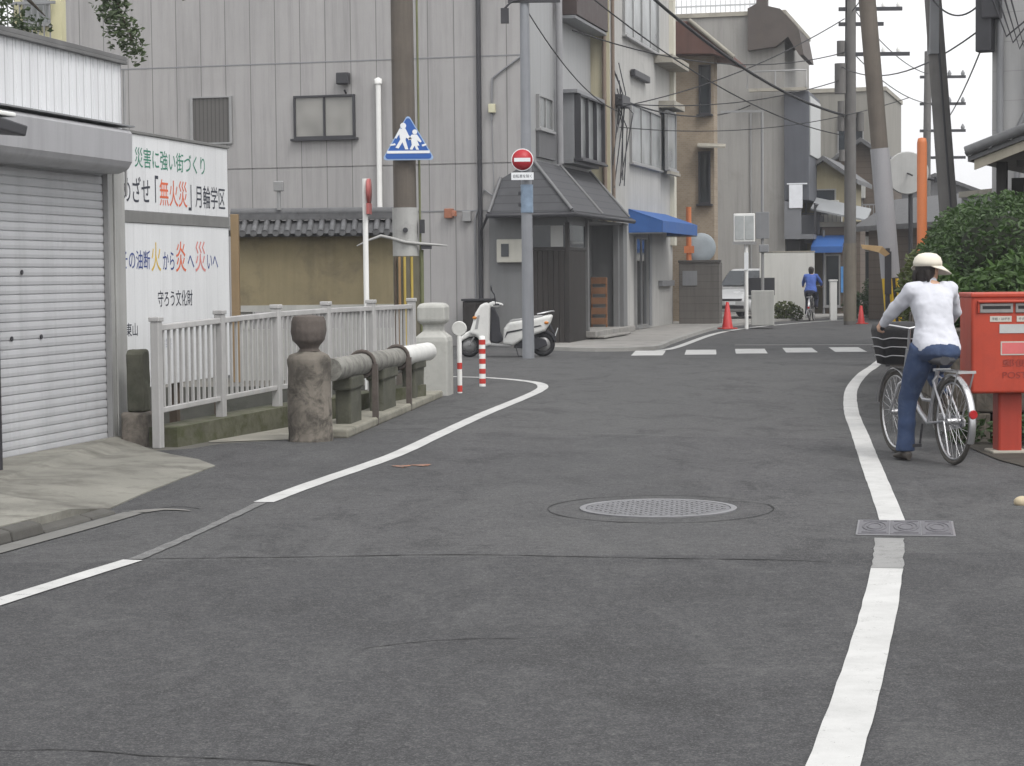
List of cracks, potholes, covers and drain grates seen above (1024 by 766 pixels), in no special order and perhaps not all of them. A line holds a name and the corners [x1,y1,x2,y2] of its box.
manhole cover [855,520,956,537]
manhole cover [580,499,737,518]
crack [31,749,318,766]
